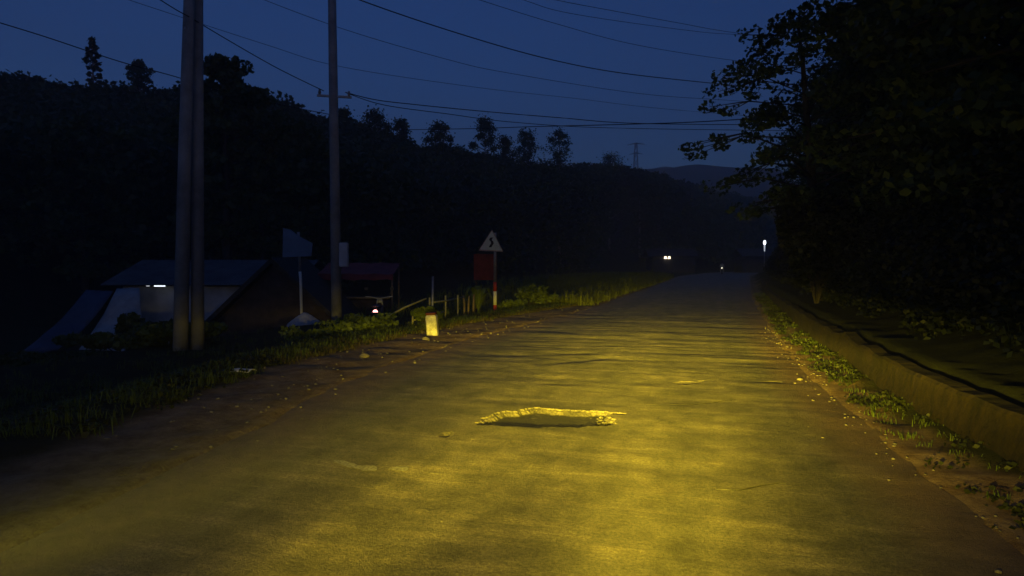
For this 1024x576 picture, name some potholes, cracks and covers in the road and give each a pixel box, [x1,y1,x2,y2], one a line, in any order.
pothole [474,407,626,428]
